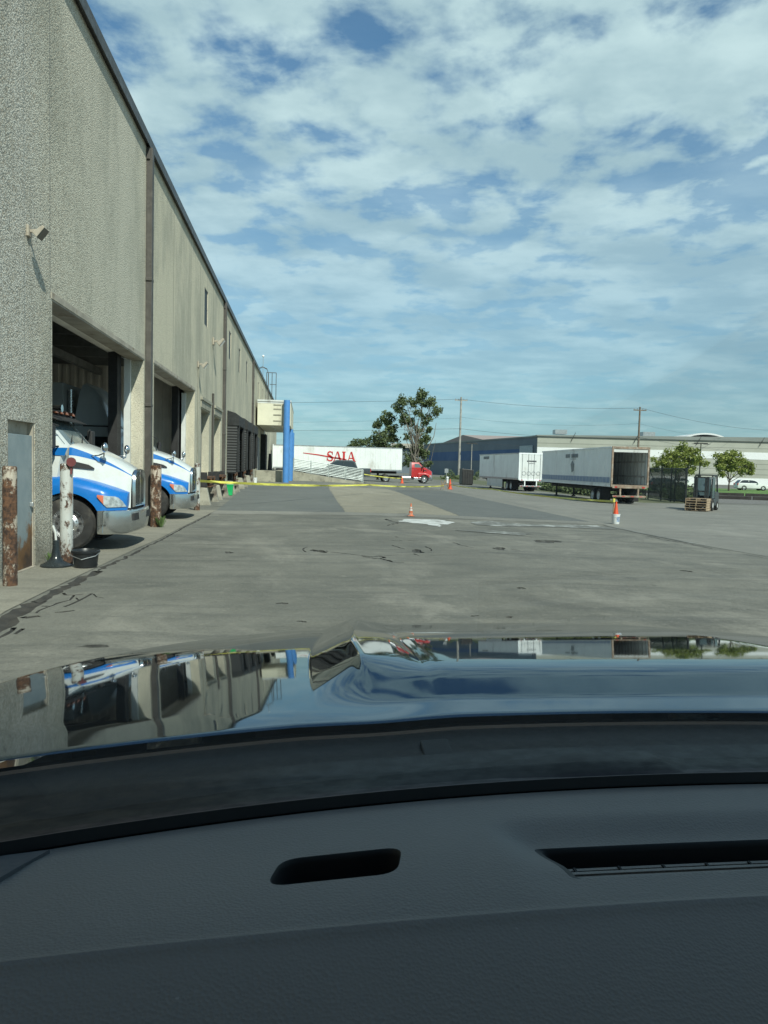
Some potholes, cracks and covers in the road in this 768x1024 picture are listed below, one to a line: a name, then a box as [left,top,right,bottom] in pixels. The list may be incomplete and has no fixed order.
crack [302,519,432,563]
